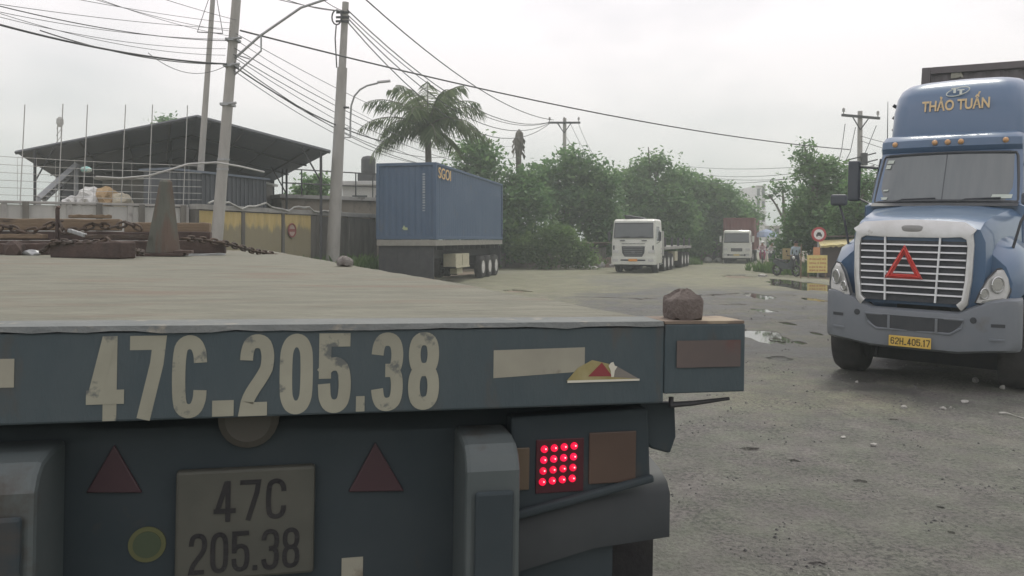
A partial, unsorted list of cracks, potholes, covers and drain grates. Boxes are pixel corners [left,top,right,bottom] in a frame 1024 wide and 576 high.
pothole [764,279,830,291]
pothole [742,292,776,300]
pothole [745,330,794,345]
